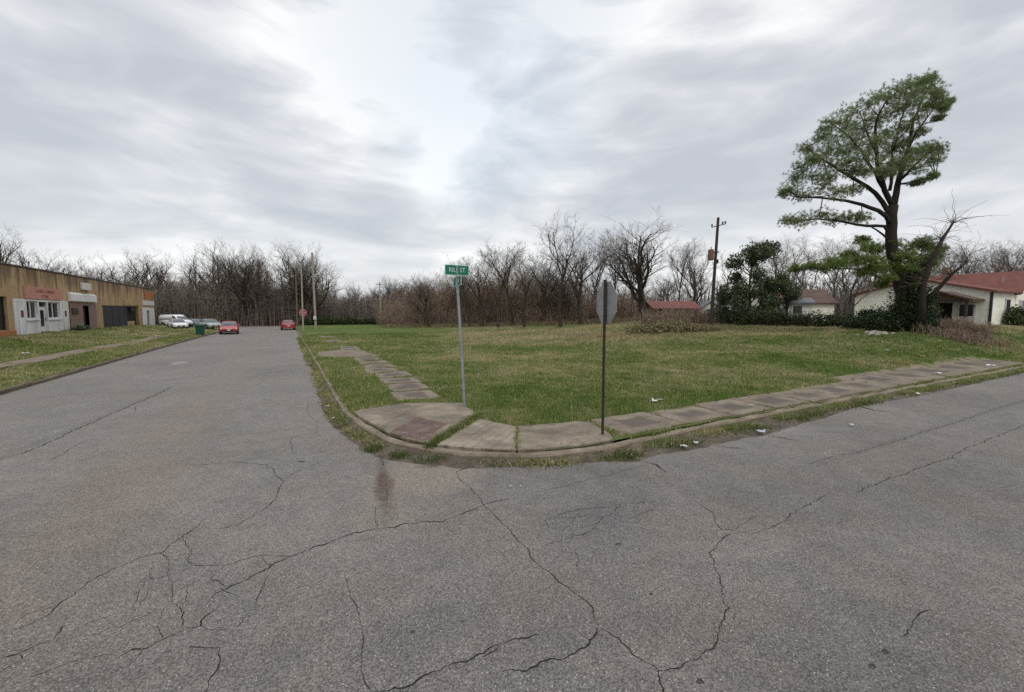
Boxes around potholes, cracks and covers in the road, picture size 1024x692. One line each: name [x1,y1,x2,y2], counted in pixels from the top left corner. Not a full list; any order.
crack [2,466,830,692]
crack [903,610,928,637]
crack [857,425,1024,493]
